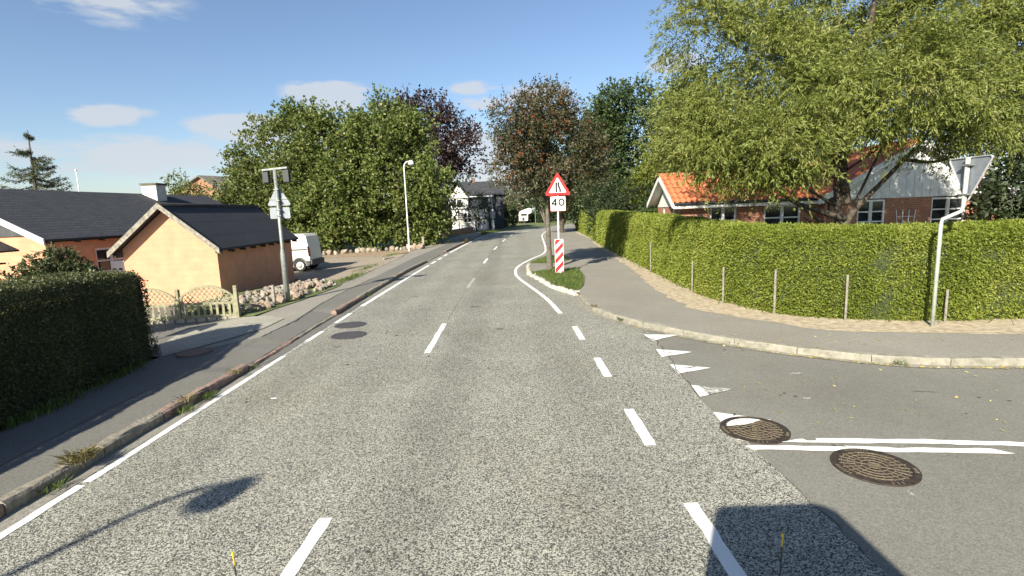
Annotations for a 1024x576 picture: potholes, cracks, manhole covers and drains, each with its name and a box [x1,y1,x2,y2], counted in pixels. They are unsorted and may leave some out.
manhole cover [720,416,791,445]
manhole cover [175,347,213,358]
manhole cover [830,448,922,487]
